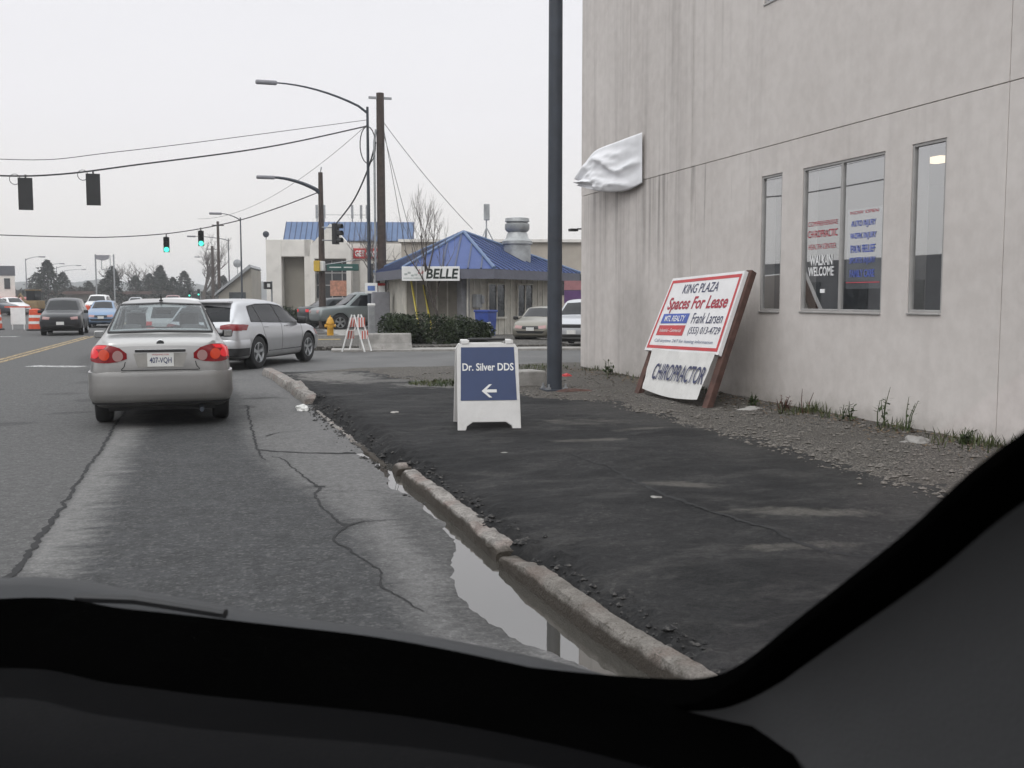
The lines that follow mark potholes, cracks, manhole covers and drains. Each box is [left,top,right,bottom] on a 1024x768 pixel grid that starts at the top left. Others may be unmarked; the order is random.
crack [245,398,423,611]
